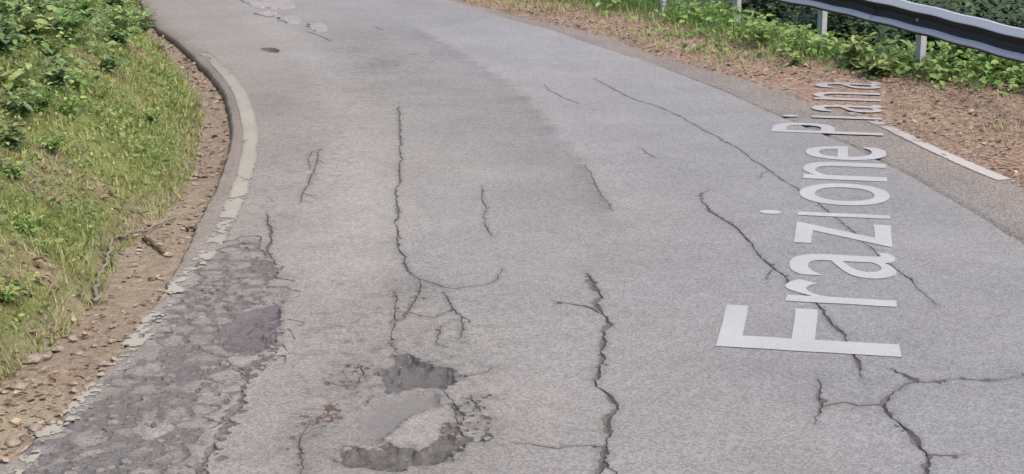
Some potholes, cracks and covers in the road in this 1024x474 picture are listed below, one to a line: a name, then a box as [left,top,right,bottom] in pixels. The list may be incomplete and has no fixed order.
crack [7,213,374,474]
crack [300,149,323,201]
crack [596,79,934,303]
pothole [373,354,464,395]
pothole [332,422,494,474]
crack [389,107,503,355]
crack [524,273,619,474]
crack [698,190,1024,474]
